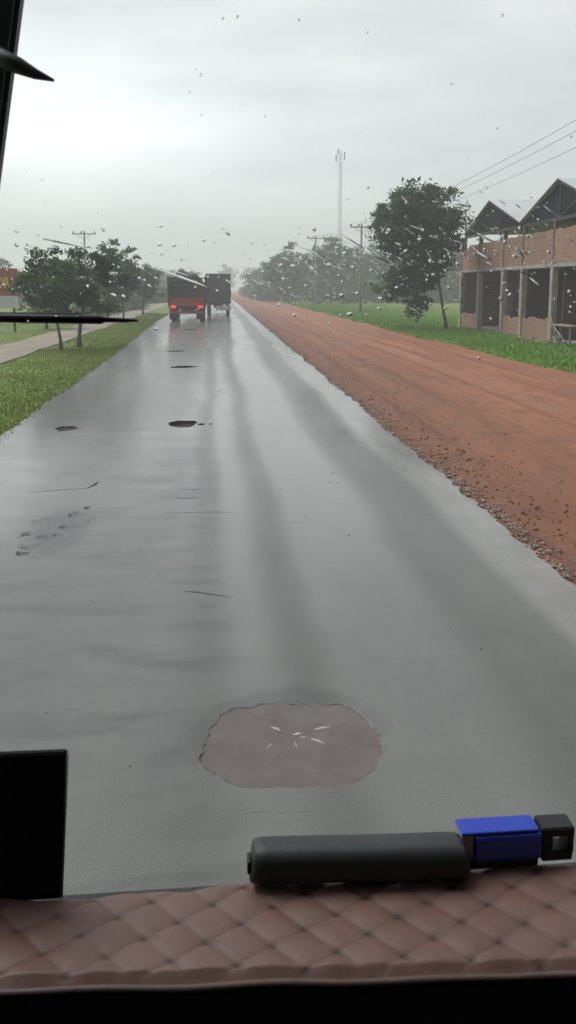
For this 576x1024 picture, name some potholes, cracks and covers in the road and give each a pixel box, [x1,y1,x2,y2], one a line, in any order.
crack [15,482,98,556]
pothole [168,420,197,428]
